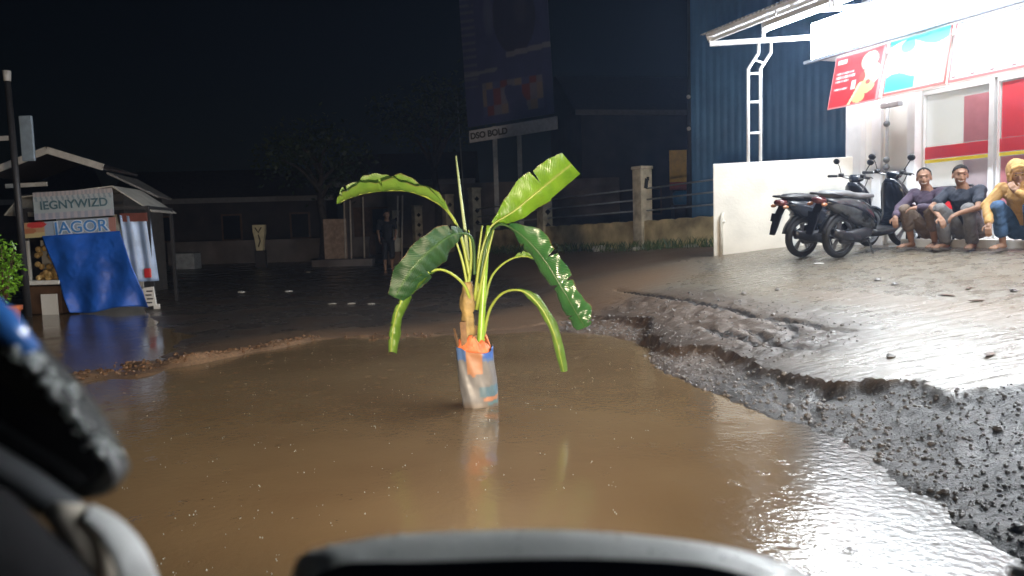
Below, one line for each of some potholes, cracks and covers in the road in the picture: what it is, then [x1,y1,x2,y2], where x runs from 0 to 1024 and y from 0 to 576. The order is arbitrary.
pothole [72,291,1024,563]
